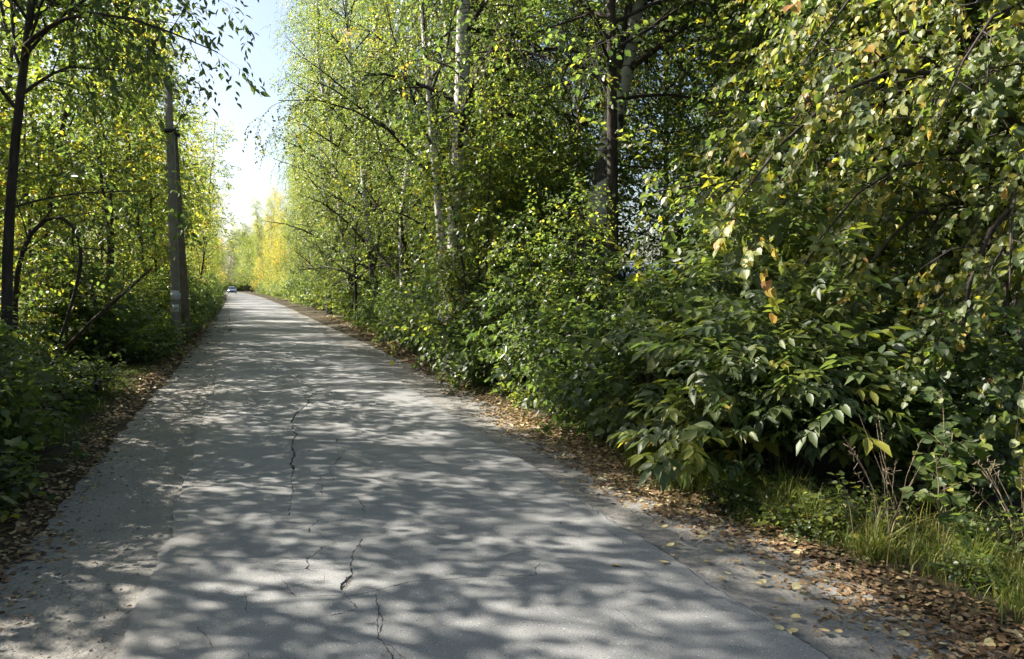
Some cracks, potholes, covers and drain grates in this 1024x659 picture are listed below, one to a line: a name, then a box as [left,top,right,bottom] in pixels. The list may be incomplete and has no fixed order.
crack [216,520,548,659]
crack [272,358,317,516]
